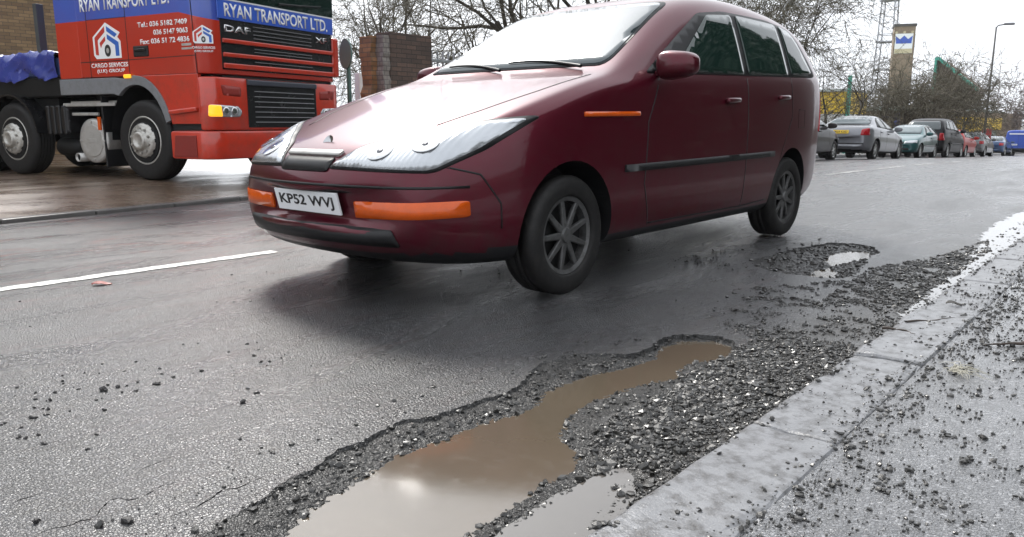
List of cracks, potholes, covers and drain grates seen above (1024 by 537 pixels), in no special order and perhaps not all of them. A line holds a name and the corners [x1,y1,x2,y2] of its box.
pothole [191,334,738,537]
pothole [749,242,880,278]
crack [38,460,176,534]
crack [171,477,262,517]
